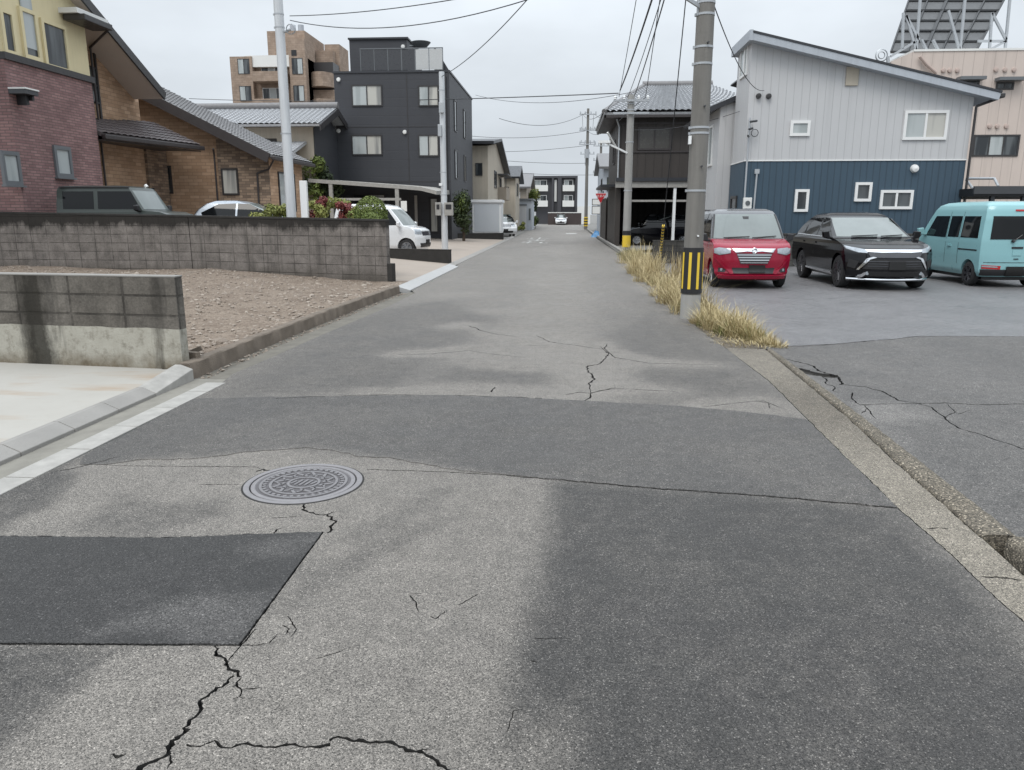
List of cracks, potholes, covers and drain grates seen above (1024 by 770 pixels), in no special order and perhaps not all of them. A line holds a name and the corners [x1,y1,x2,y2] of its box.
crack [410,593,478,619]
crack [788,359,1022,449]
crack [402,326,711,396]
crack [135,617,450,770]
manhole cover [241,464,364,508]
crack [277,506,338,533]
